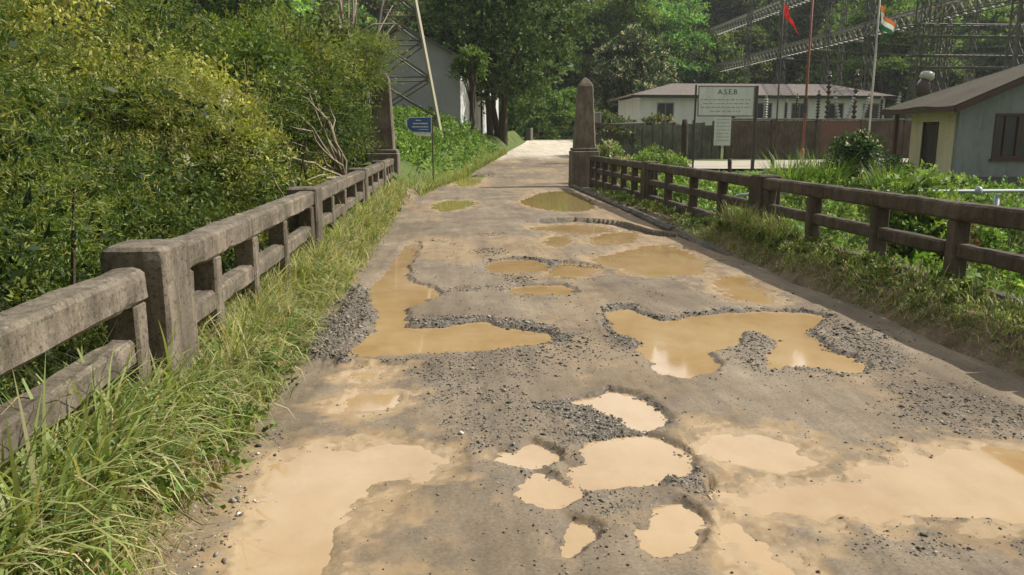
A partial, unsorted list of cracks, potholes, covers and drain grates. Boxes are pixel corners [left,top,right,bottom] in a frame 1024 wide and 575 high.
pothole [519,190,598,212]
pothole [708,442,1024,527]
pothole [471,255,610,281]
pothole [593,299,891,384]
pothole [483,383,733,571]
pothole [589,243,713,277]
pothole [324,239,585,373]
pothole [688,425,825,476]
pothole [224,437,451,575]
